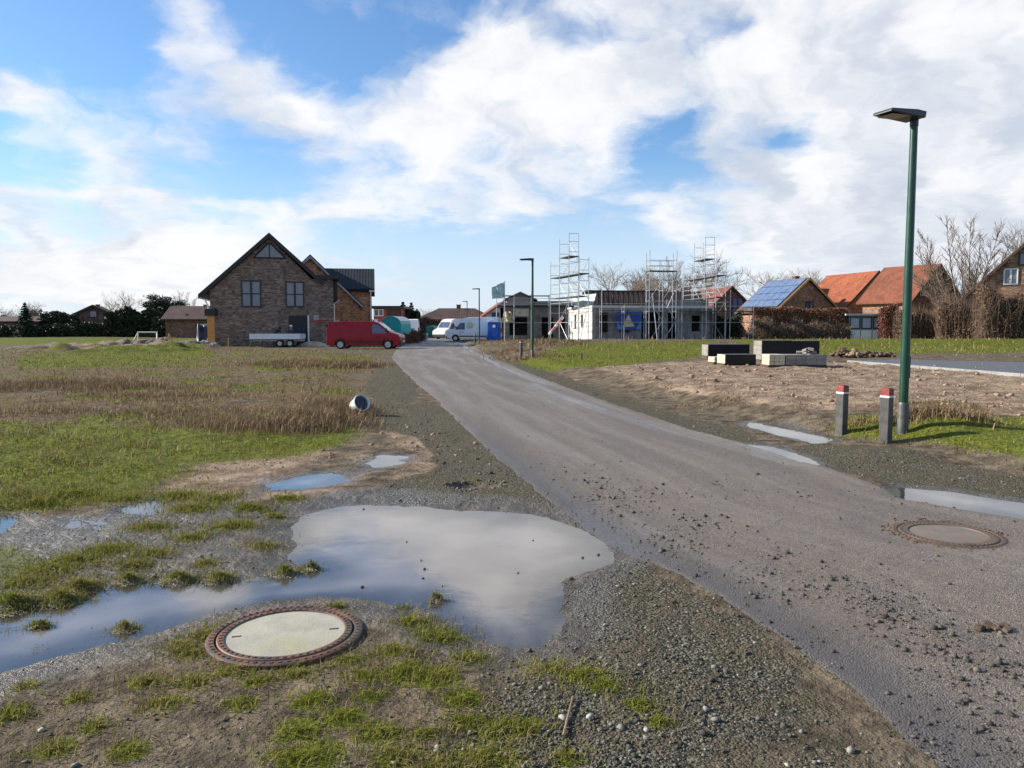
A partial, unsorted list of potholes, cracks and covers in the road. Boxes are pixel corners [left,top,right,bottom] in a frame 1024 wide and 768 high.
manhole cover [891,520,1009,549]
manhole cover [205,605,363,670]
